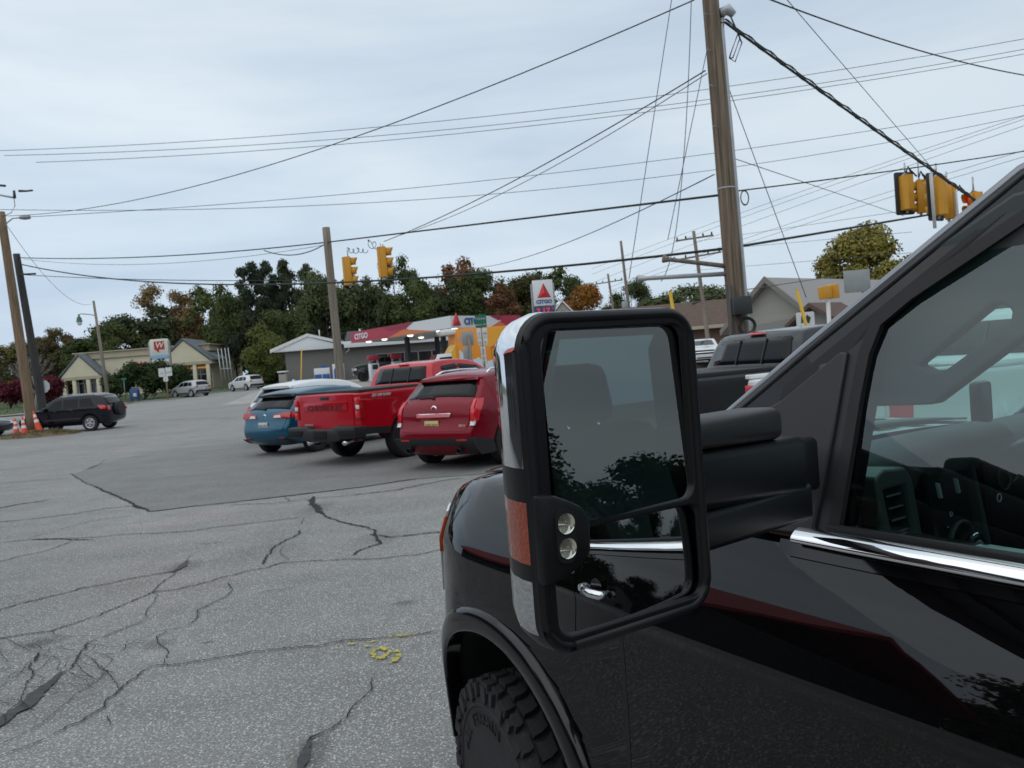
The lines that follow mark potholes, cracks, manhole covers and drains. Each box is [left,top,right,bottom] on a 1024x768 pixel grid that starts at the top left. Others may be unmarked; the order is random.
crack [0,463,458,755]
